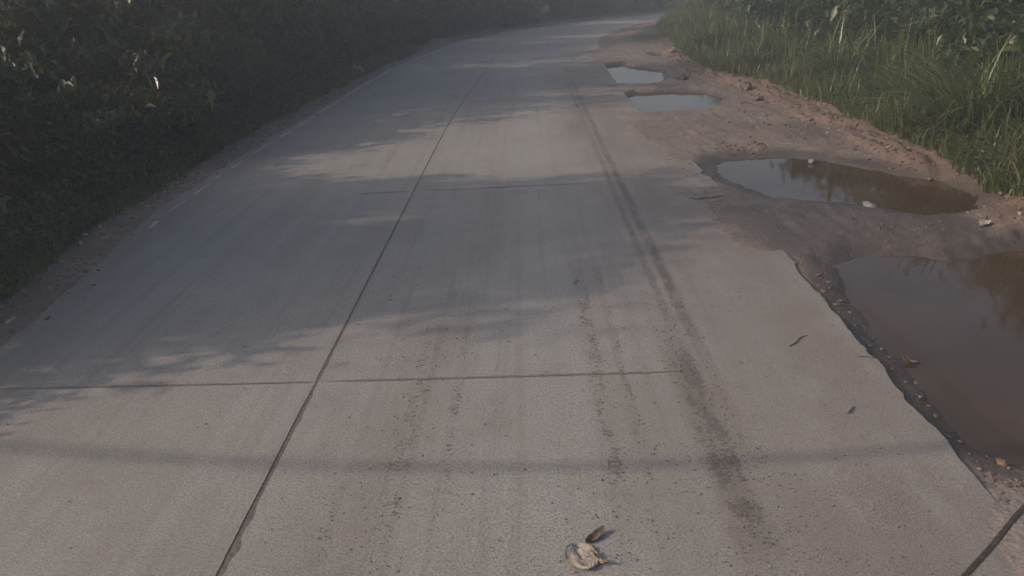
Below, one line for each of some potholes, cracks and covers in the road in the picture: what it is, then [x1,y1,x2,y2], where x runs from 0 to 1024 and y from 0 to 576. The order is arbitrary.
pothole [603,61,670,84]
pothole [797,230,1024,476]
pothole [695,146,993,217]
pothole [624,86,733,112]
